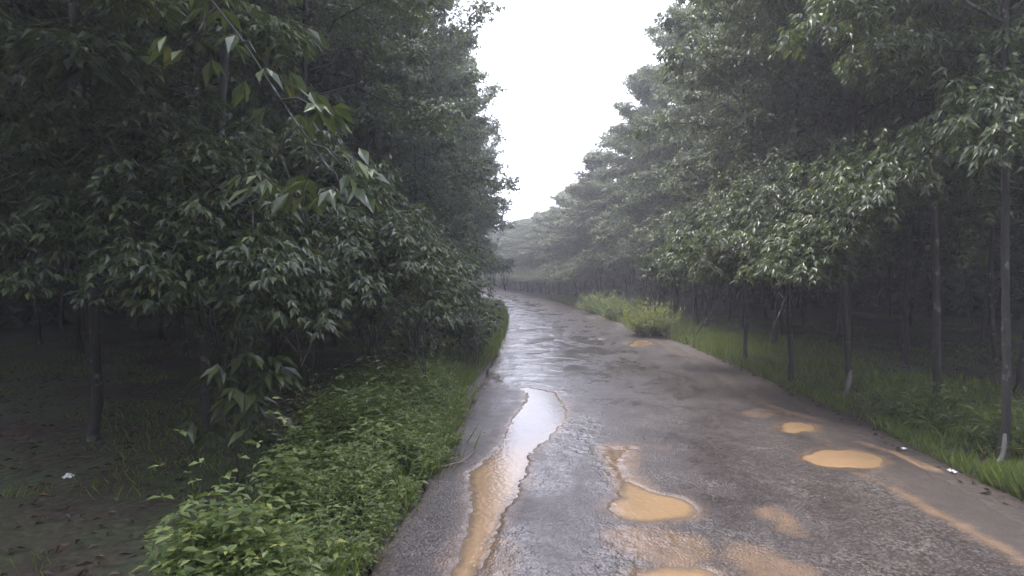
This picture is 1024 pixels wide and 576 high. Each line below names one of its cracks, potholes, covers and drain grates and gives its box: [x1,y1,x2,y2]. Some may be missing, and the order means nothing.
pothole [775,421,822,434]
pothole [436,386,574,576]
pothole [599,445,642,480]
pothole [796,448,892,470]
pothole [600,478,707,525]
pothole [620,560,732,576]
